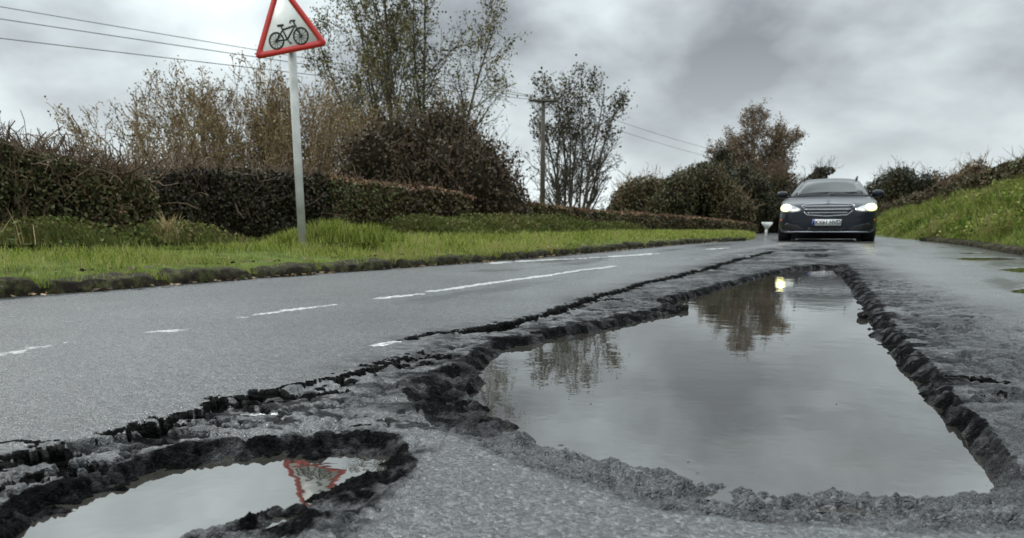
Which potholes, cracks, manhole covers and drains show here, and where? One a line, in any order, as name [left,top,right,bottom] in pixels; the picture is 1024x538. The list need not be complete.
pothole [0,405,417,538]
crack [944,374,1015,403]
pothole [401,264,1024,536]
